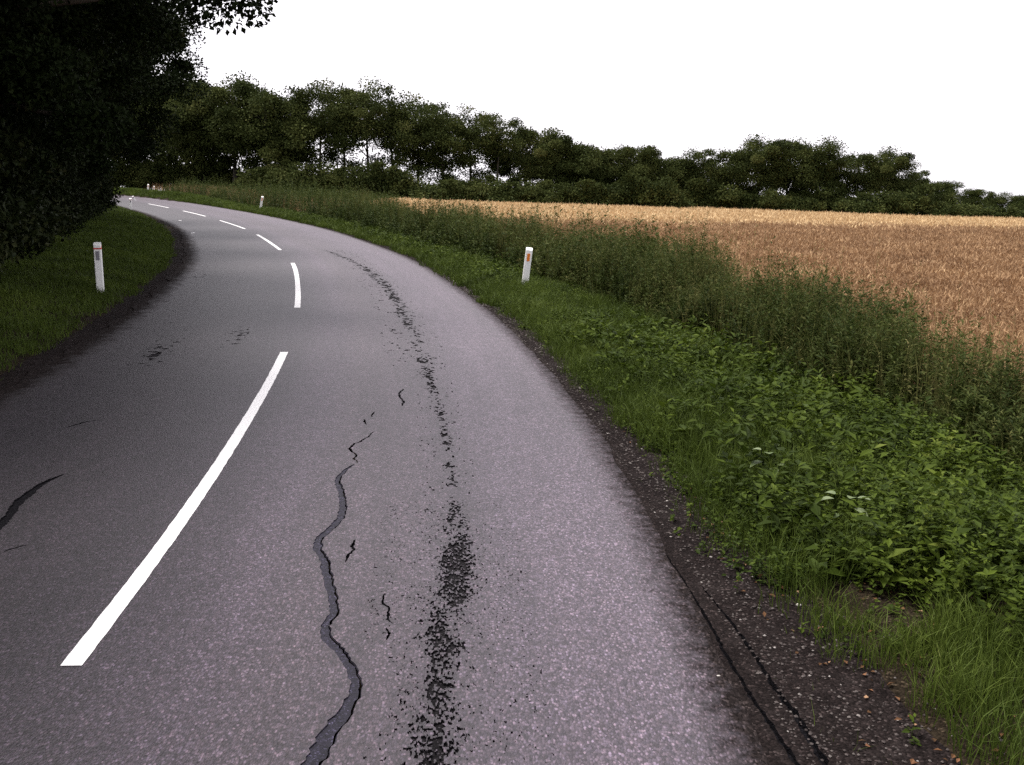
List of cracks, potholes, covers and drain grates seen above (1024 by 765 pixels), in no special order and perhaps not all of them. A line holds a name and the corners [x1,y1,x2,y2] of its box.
crack [300,464,363,765]
crack [0,474,64,552]
crack [327,251,554,765]
